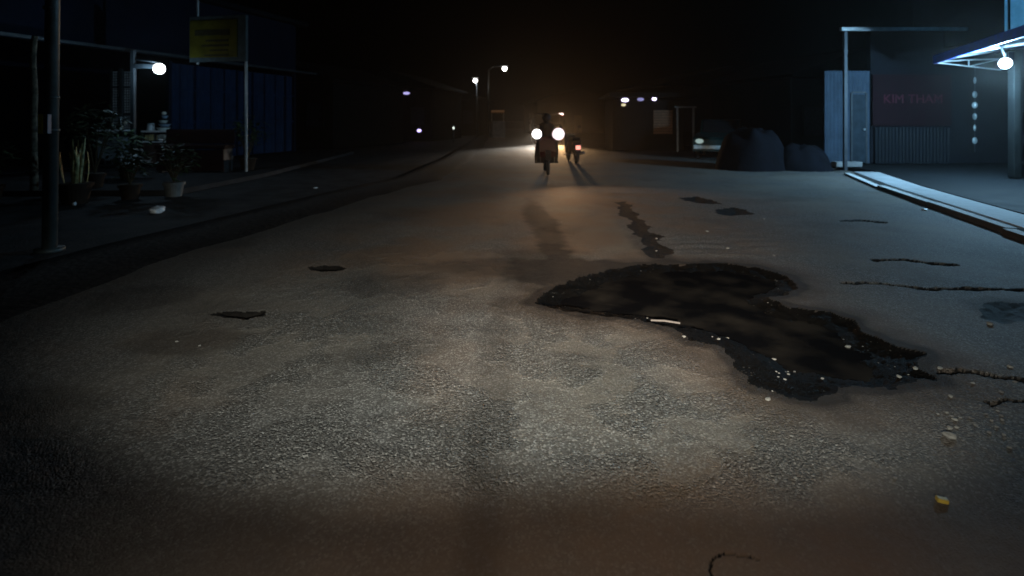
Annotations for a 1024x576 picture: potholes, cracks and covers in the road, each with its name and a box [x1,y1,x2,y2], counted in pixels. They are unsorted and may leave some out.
pothole [535,263,937,402]
crack [709,553,751,576]
pothole [979,302,1024,324]
pothole [716,207,753,216]
crack [936,368,1024,407]
pothole [210,311,265,320]
